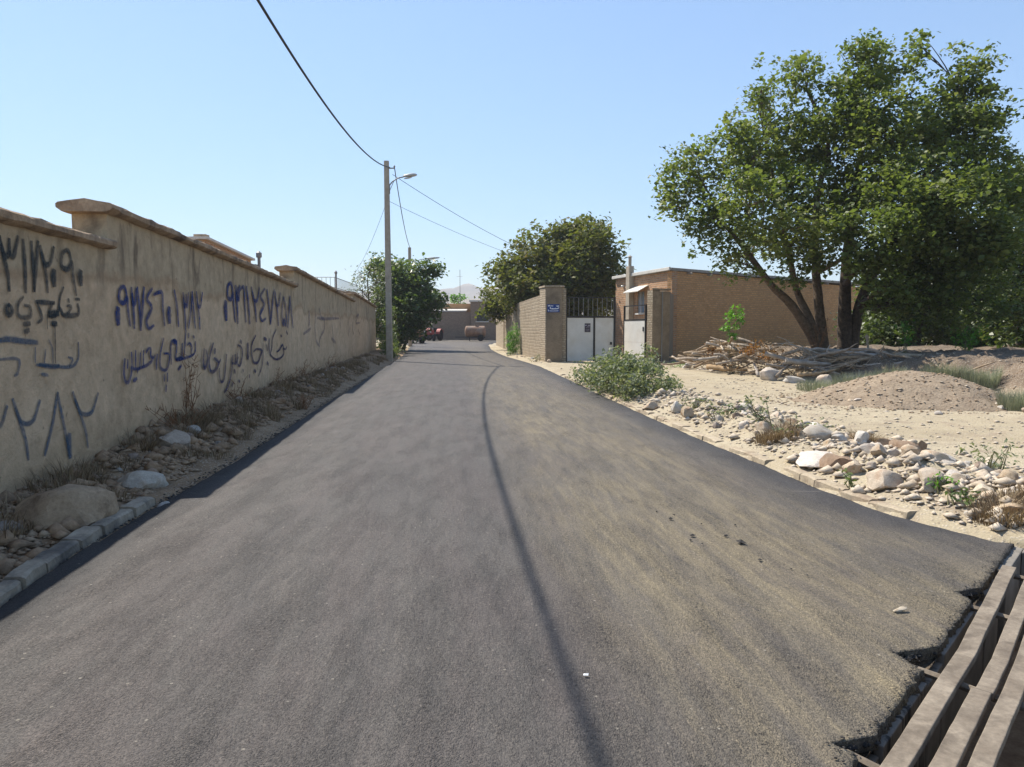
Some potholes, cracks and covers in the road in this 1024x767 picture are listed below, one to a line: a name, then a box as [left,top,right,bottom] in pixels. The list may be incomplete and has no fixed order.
drain grate [847,565,1024,767]
